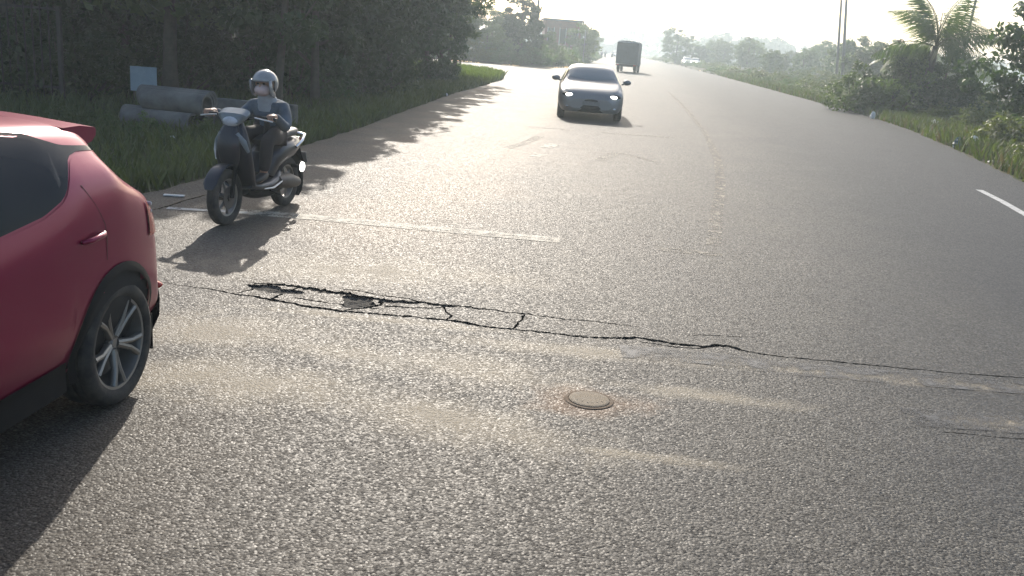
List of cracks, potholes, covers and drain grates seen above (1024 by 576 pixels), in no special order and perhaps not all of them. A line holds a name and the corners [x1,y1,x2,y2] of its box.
pothole [247,284,304,295]
crack [162,281,1024,378]
pothole [341,295,376,310]
manhole cover [564,390,614,410]
